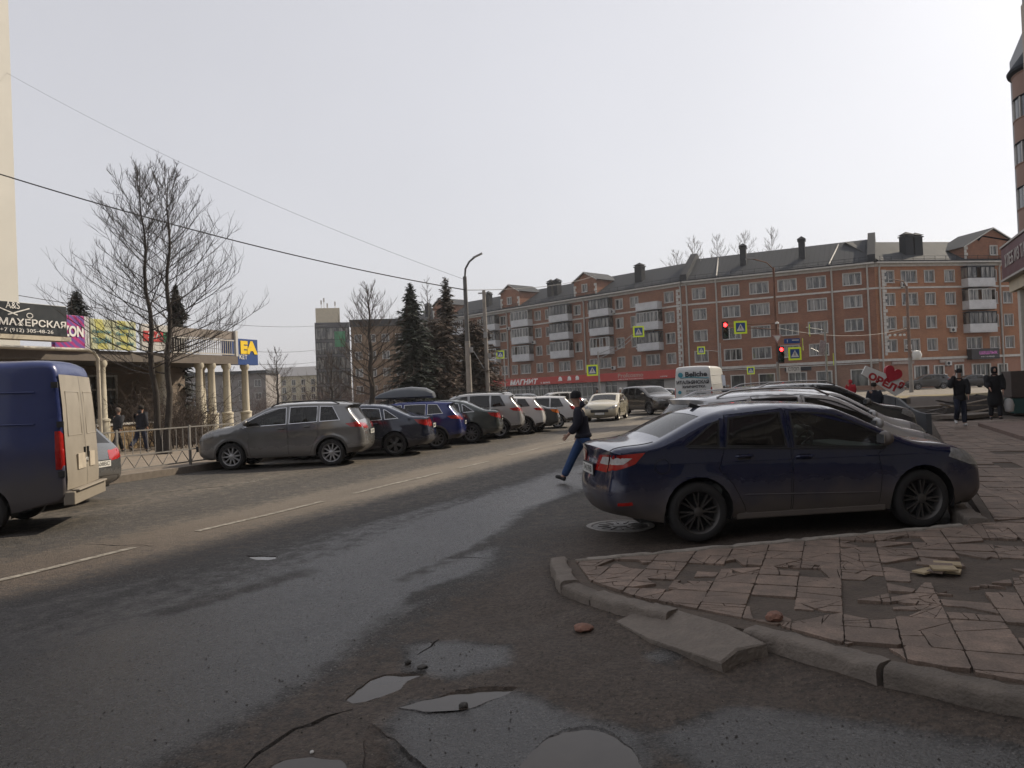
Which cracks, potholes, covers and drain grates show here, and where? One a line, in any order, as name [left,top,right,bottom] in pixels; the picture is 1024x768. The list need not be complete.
pothole [346,670,427,704]
pothole [519,725,649,768]
crack [243,709,353,768]
manhole cover [586,520,655,532]
pothole [398,686,518,713]
